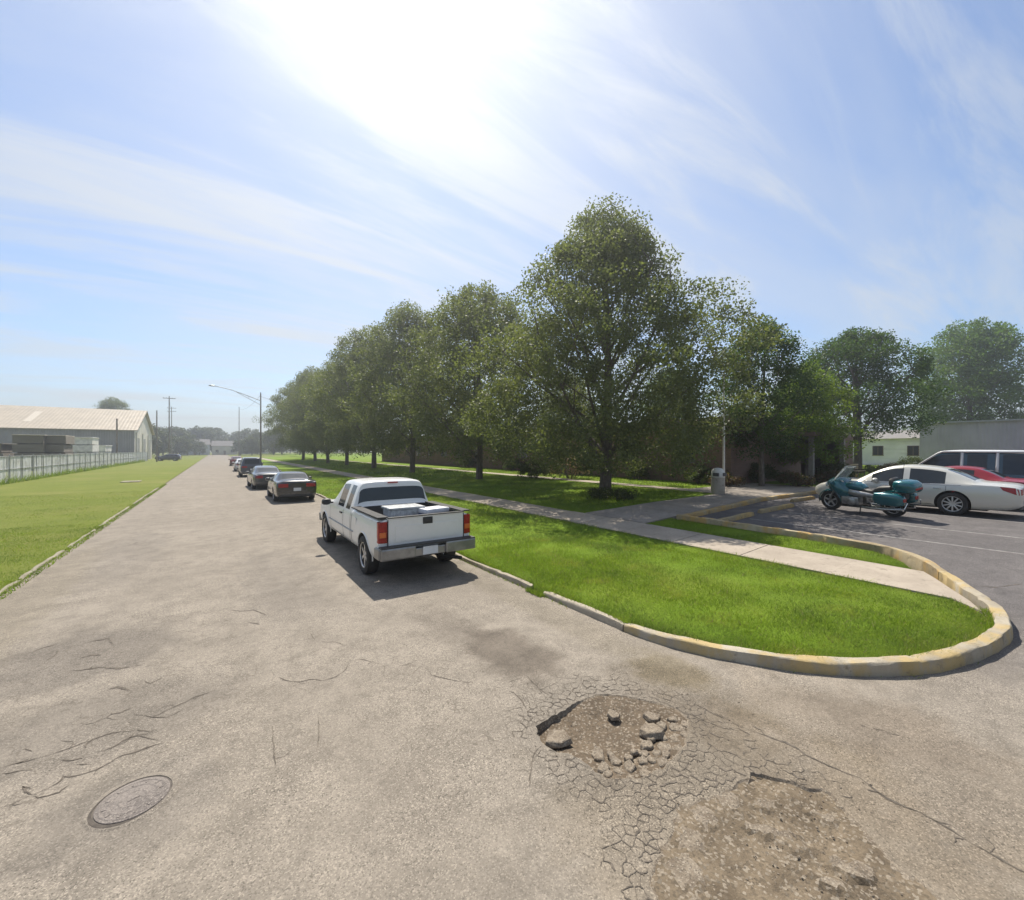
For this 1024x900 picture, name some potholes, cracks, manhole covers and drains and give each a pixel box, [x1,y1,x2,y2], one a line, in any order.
crack [272,634,385,684]
pothole [536,694,689,780]
manhole cover [81,772,180,832]
crack [2,692,209,806]
crack [506,671,855,900]
crack [35,637,161,690]
